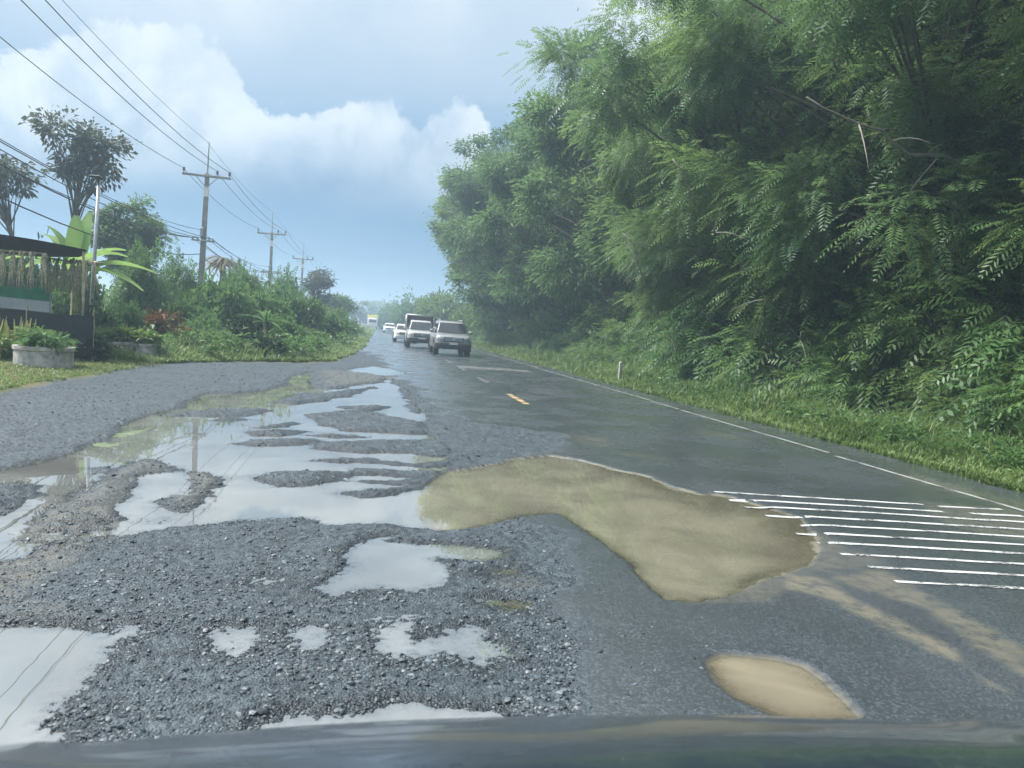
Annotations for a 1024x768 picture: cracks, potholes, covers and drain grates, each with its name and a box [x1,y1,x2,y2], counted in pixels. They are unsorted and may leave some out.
pothole [415,451,840,608]
pothole [335,365,412,378]
pothole [291,527,527,604]
pothole [0,369,466,568]
pothole [679,642,893,721]
pothole [0,609,180,745]
pothole [348,614,554,684]
